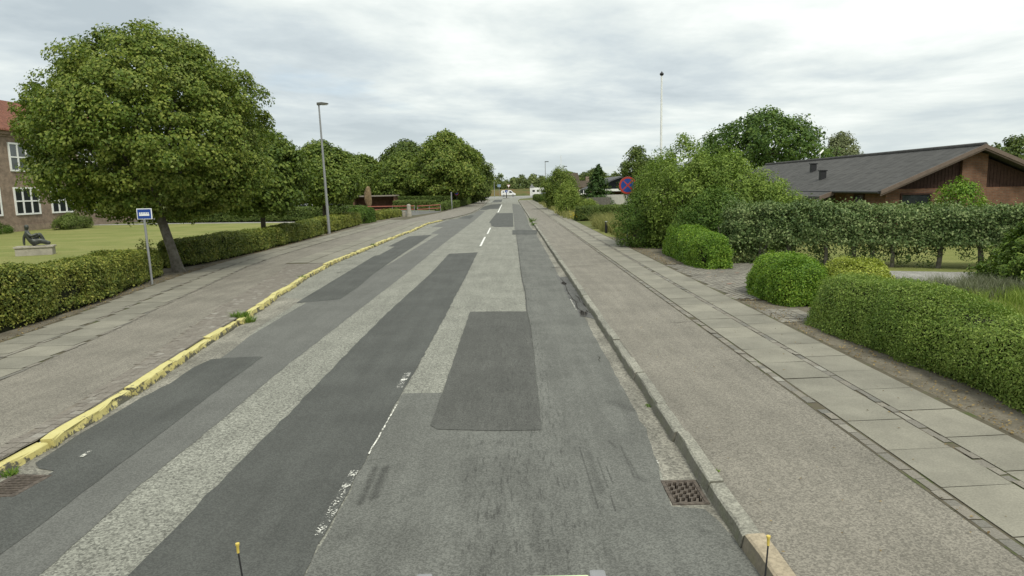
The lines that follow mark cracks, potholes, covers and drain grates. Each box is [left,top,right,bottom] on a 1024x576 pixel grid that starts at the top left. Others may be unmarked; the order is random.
drain grate [661,480,710,506]
drain grate [0,474,52,497]
